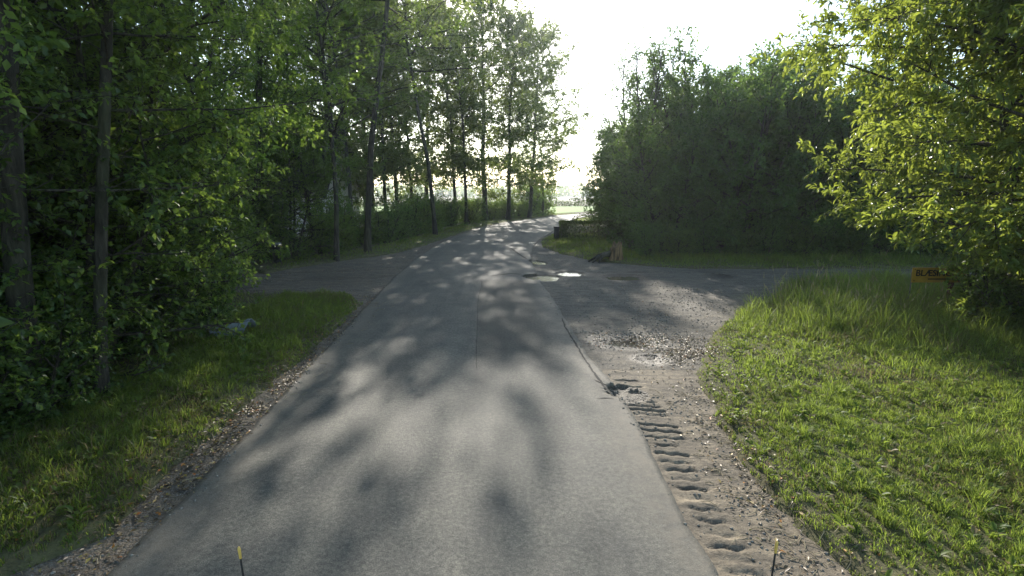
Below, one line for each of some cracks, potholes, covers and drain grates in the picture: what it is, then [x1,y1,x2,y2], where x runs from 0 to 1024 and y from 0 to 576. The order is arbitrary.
pothole [608,383,650,404]
pothole [633,354,669,365]
pothole [593,336,664,349]
